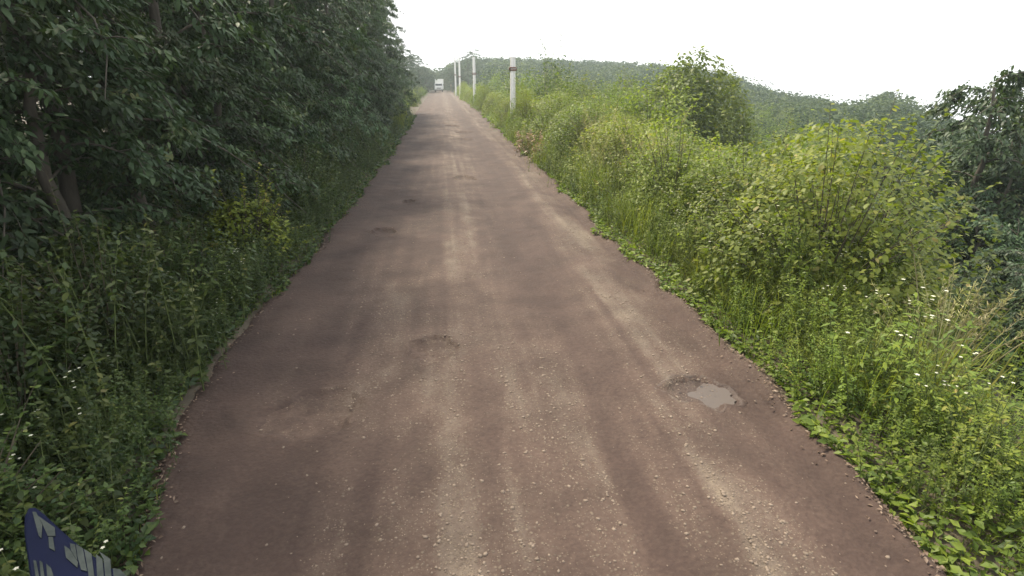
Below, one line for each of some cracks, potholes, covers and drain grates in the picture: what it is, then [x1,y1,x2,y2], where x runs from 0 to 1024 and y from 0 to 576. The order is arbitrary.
pothole [654,373,748,413]
pothole [243,383,373,443]
pothole [405,334,461,367]
pothole [368,226,398,237]
